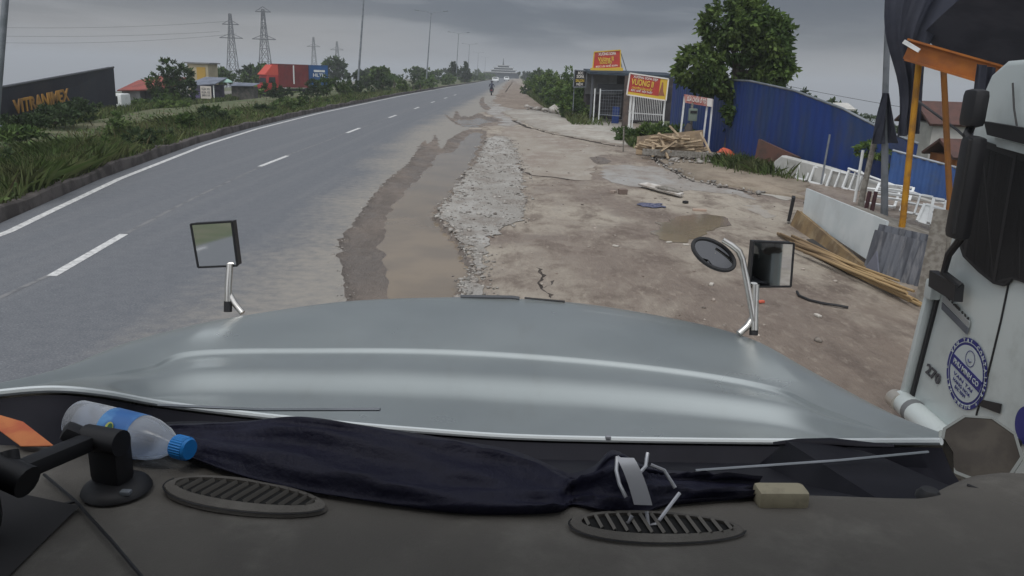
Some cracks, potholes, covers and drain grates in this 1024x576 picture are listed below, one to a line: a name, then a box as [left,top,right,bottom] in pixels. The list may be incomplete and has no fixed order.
crack [511,120,623,147]
pothole [444,111,498,128]
pothole [336,129,487,301]
crack [536,266,554,298]
crack [518,168,580,181]
